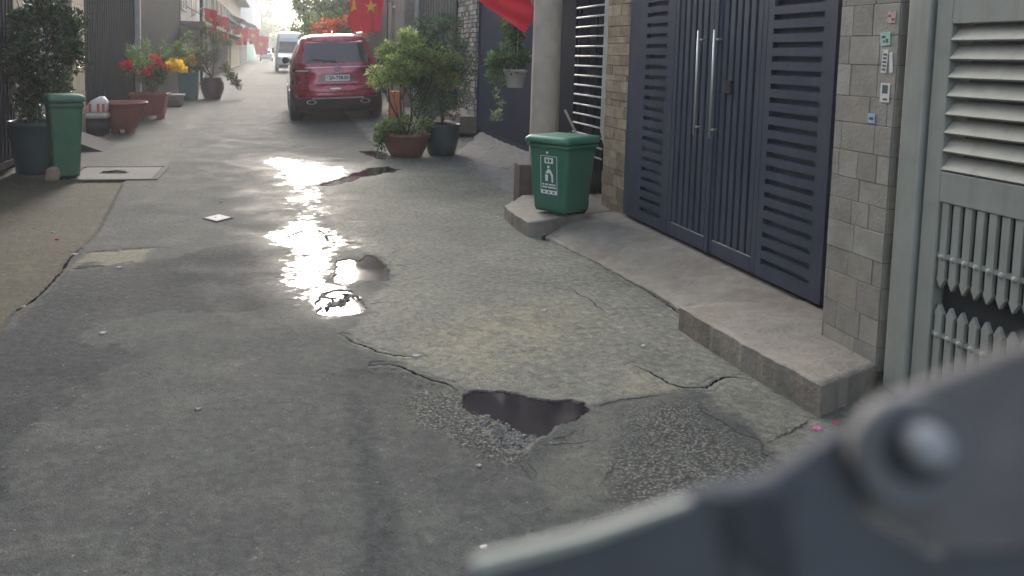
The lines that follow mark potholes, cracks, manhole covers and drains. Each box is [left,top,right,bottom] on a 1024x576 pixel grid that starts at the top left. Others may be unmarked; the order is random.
crack [335,333,463,393]
crack [5,247,159,320]
pothole [309,165,410,188]
crack [600,362,810,463]
manhole cover [60,166,170,182]
crack [521,425,597,486]
pothole [325,253,396,286]
pothole [305,287,379,319]
crack [550,242,679,316]
pothole [449,385,602,459]
